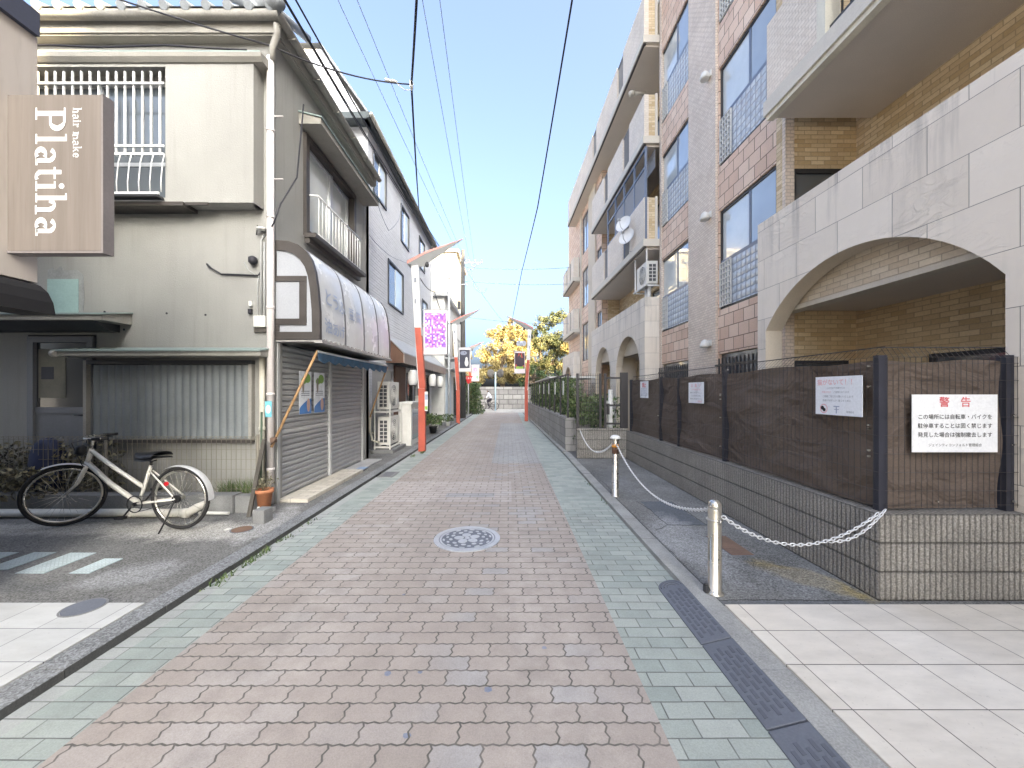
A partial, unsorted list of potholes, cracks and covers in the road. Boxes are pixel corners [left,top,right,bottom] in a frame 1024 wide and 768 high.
manhole cover [56,598,109,618]
manhole cover [434,526,500,552]
